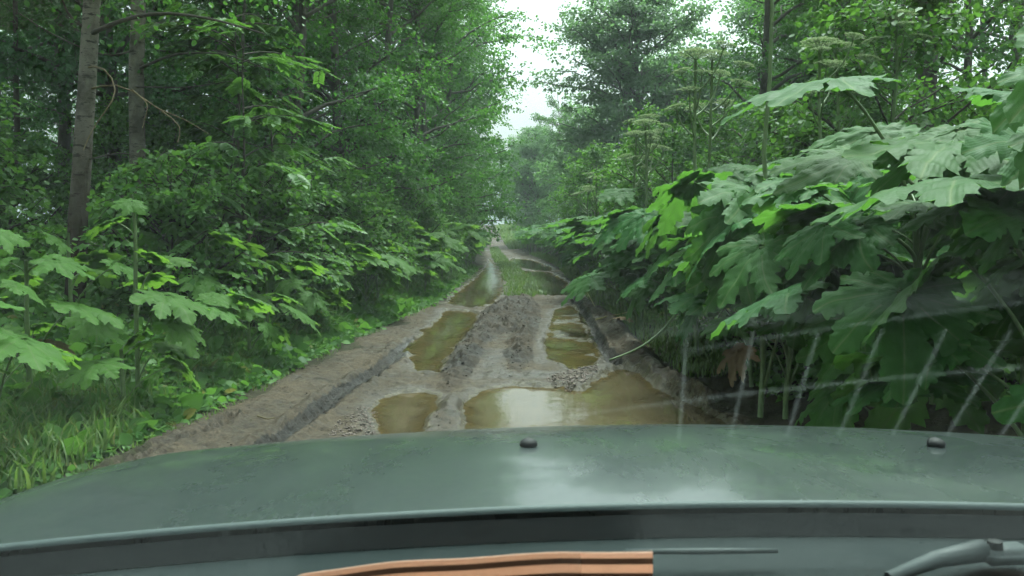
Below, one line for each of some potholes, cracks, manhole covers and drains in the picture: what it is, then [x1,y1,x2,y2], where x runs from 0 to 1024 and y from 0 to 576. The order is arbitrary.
pothole [444,258,506,308]
pothole [367,386,443,434]
pothole [540,302,604,370]
pothole [406,308,479,372]
pothole [457,359,743,430]
